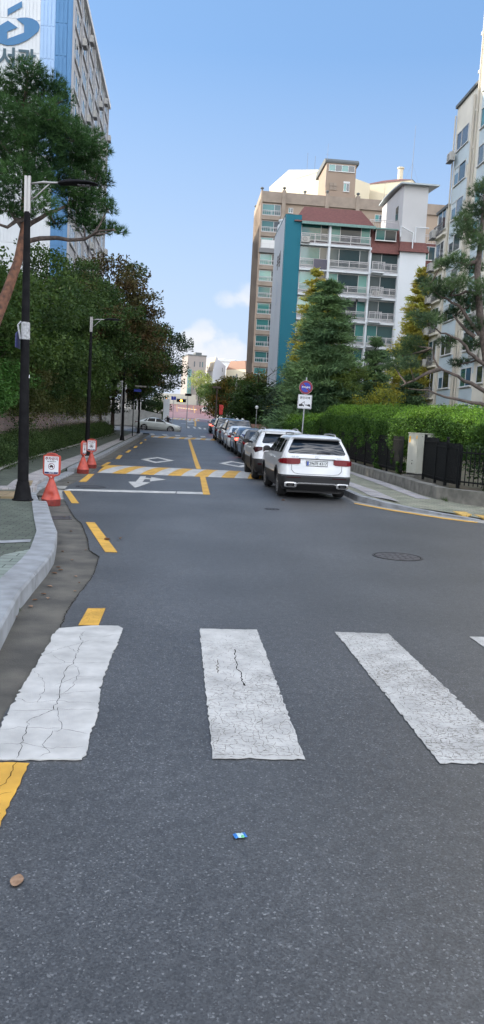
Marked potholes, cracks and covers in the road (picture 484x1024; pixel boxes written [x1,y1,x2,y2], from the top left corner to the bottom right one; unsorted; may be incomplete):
crack [204,630,300,756]
crack [2,608,109,794]
manhole cover [372,552,423,561]
